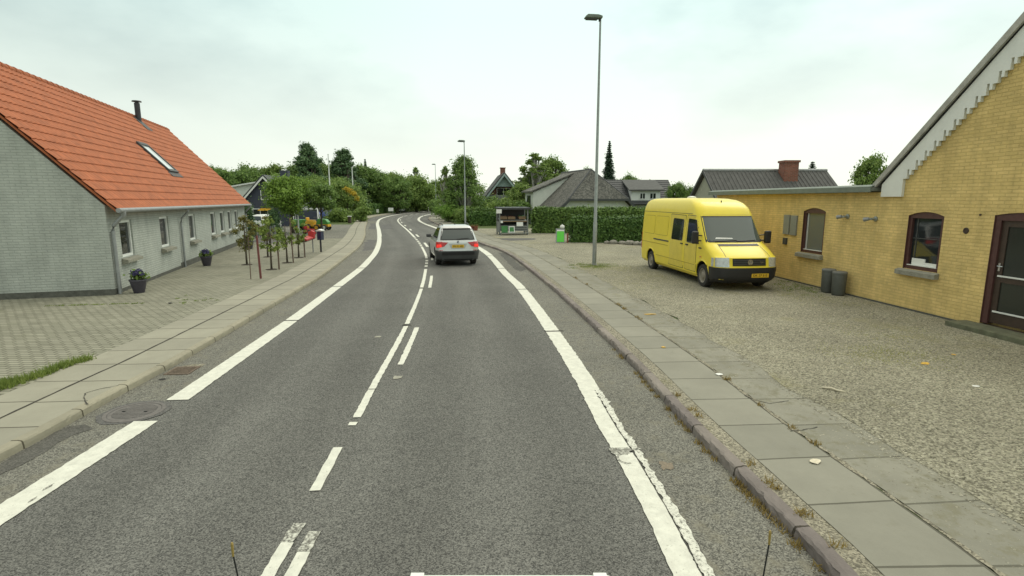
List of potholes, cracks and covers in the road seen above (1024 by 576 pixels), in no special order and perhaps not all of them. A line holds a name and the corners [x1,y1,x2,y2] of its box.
drain grate [163,366,201,375]
manhole cover [102,402,166,423]
